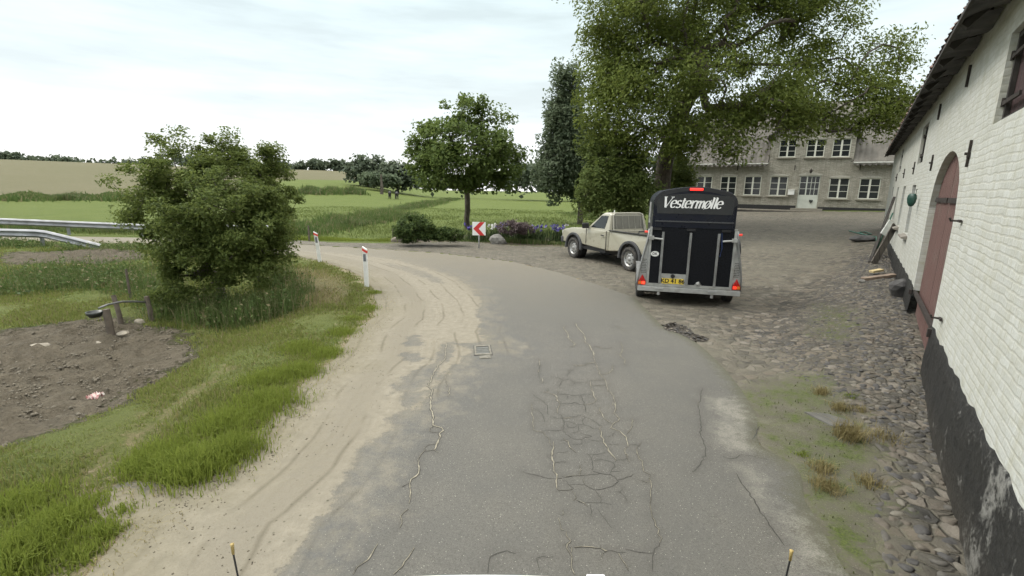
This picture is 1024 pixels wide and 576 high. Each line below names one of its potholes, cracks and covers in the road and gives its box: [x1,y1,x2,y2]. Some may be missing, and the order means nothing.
pothole [663,322,709,343]
crack [524,323,662,574]
crack [723,426,784,545]
crack [399,343,451,528]
crack [353,543,415,574]
manhole cover [474,345,493,359]
